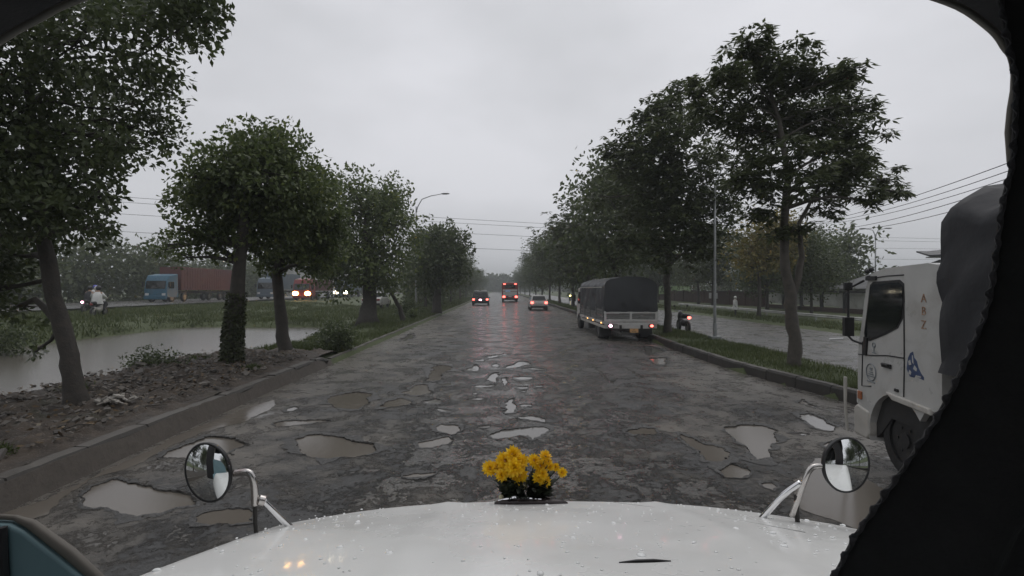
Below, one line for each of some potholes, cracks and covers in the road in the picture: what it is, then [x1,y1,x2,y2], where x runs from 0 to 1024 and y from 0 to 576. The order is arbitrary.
pothole [413,435,456,449]
pothole [486,423,555,441]
pothole [281,431,388,465]
pothole [187,507,258,527]
pothole [271,418,331,427]
pothole [708,463,752,478]
pothole [675,431,740,465]
pothole [374,396,415,409]
pothole [721,421,789,466]
pothole [515,415,548,423]
pothole [501,360,534,370]
